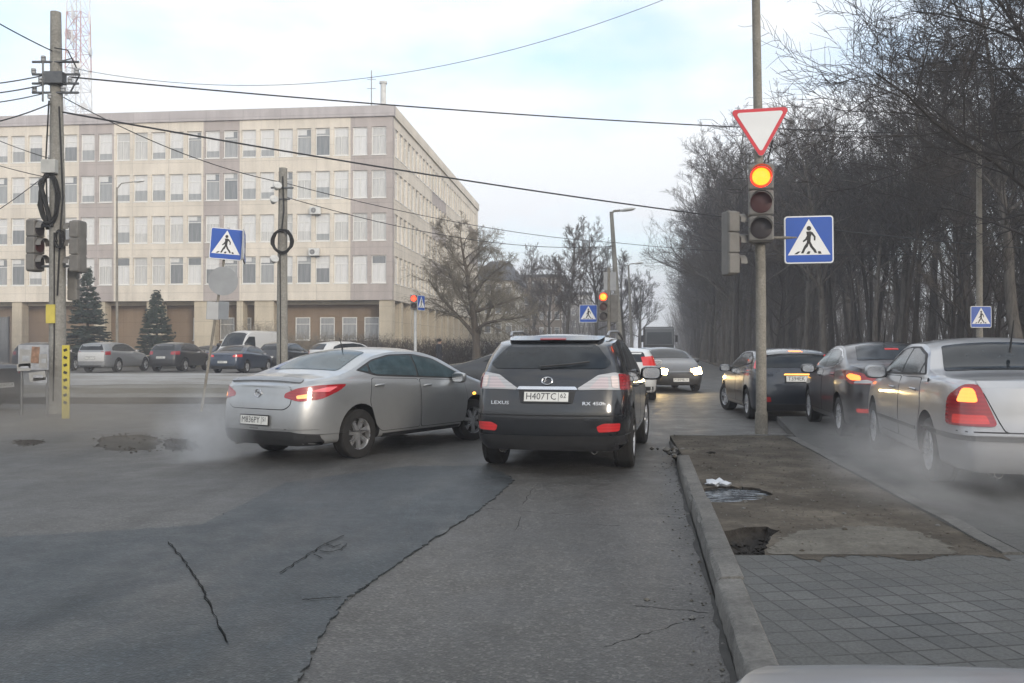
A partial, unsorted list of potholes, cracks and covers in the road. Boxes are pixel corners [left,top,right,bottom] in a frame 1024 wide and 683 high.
crack [279,535,347,573]
pothole [704,486,773,495]
crack [168,541,228,642]
crack [604,605,709,647]
pothole [724,526,778,555]
pothole [92,433,167,453]
pothole [158,437,202,452]
crack [348,486,569,601]
